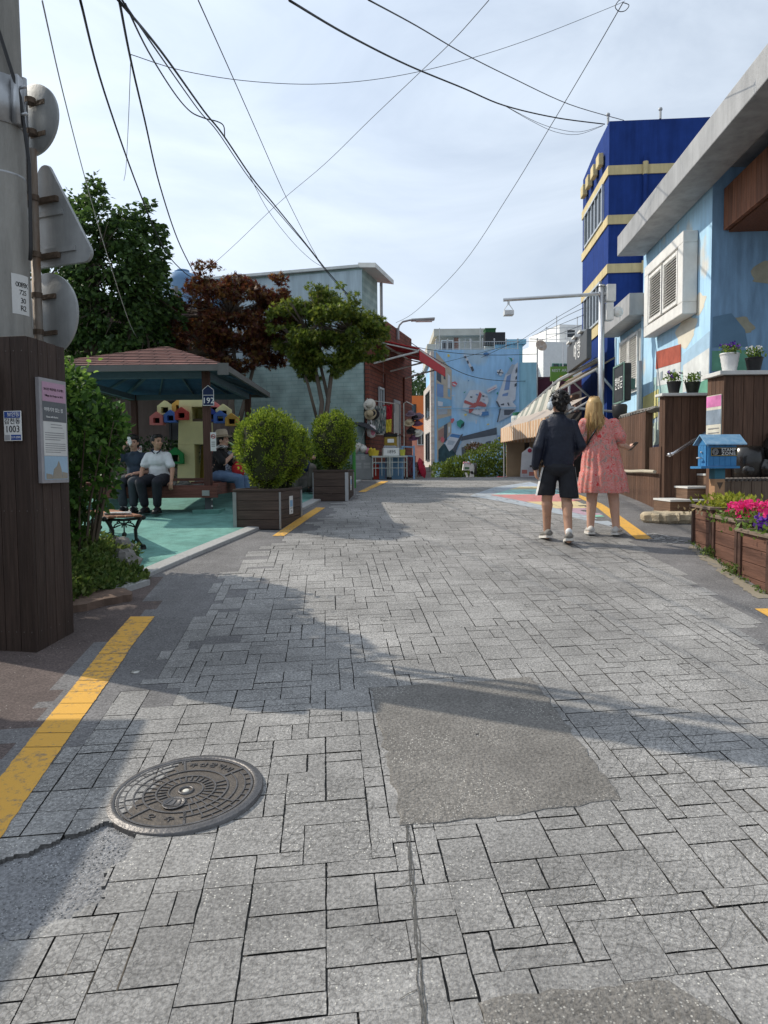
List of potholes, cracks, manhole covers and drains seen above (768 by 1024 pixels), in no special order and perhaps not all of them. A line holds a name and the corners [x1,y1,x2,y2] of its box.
crack [393,825,439,1024]
manhole cover [105,755,263,842]
